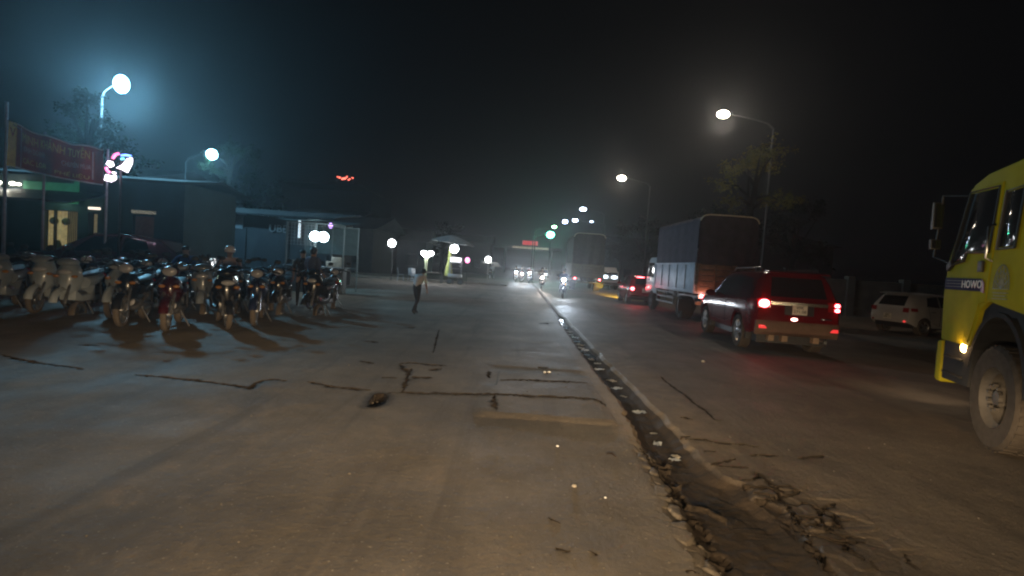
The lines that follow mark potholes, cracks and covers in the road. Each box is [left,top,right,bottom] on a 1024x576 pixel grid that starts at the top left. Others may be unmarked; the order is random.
crack [487,367,586,383]
crack [640,377,866,571]
crack [362,330,447,392]
pothole [366,393,389,407]
